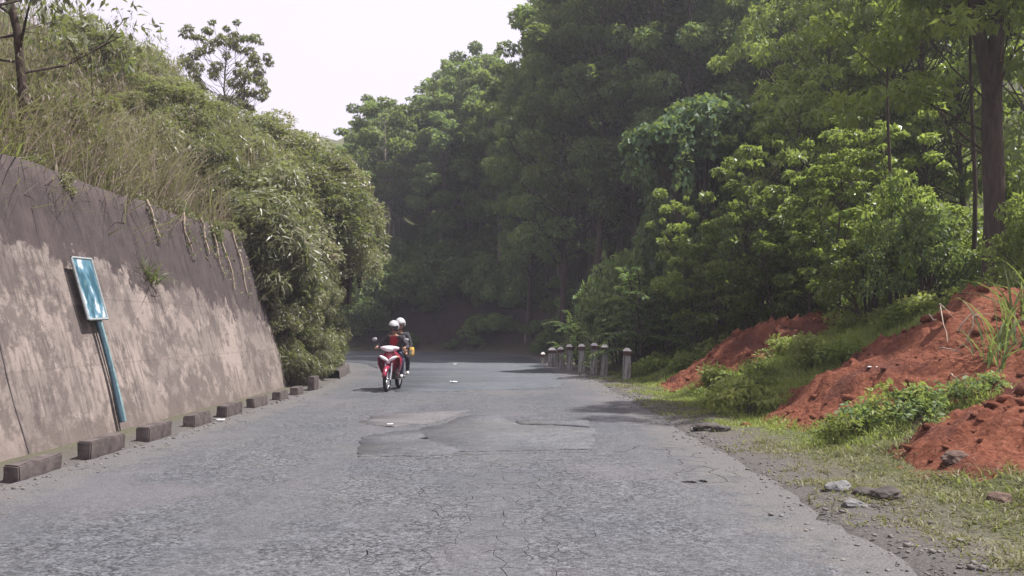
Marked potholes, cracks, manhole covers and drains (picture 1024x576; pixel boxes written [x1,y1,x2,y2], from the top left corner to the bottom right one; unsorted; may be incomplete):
crack [622,444,741,484]
crack [349,452,598,576]
